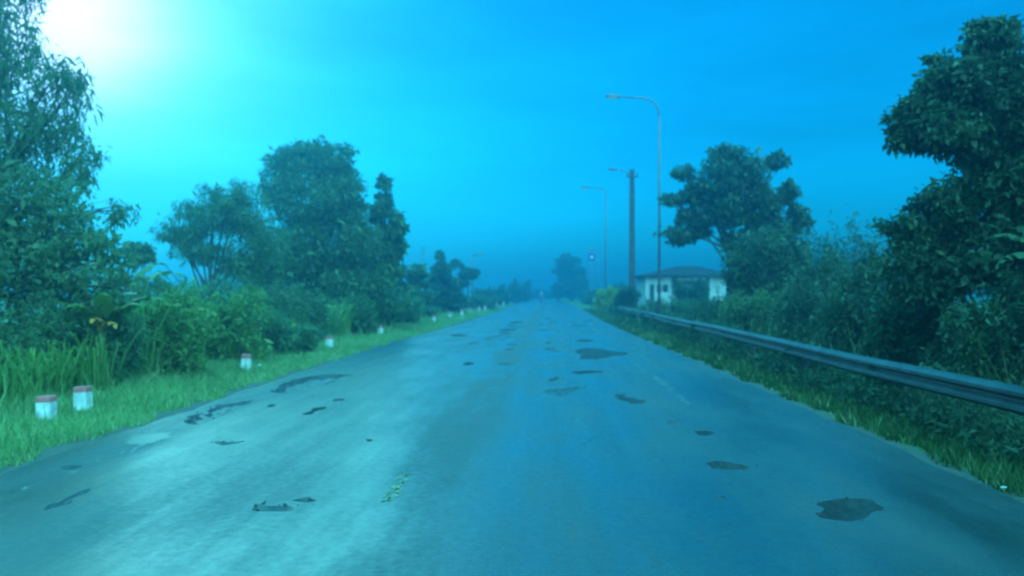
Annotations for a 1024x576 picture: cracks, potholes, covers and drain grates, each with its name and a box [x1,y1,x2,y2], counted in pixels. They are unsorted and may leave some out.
pothole [706,461,757,470]
pothole [184,412,203,425]
pothole [575,348,628,359]
pothole [544,386,587,396]
pothole [815,497,884,521]
pothole [265,374,351,393]
pothole [615,393,646,404]
pothole [203,399,256,419]
pothole [252,501,298,512]
pothole [42,489,91,511]
